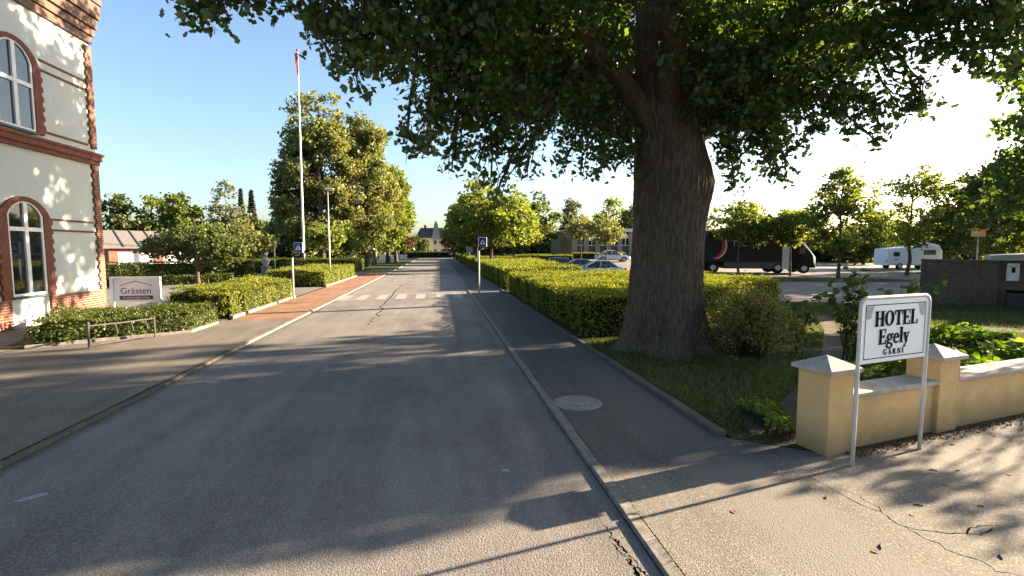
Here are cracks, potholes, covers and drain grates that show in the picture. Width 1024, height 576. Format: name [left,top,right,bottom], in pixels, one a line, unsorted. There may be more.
crack [802,473,1019,576]
crack [603,525,648,576]
manhole cover [553,395,602,412]
crack [365,271,416,327]
